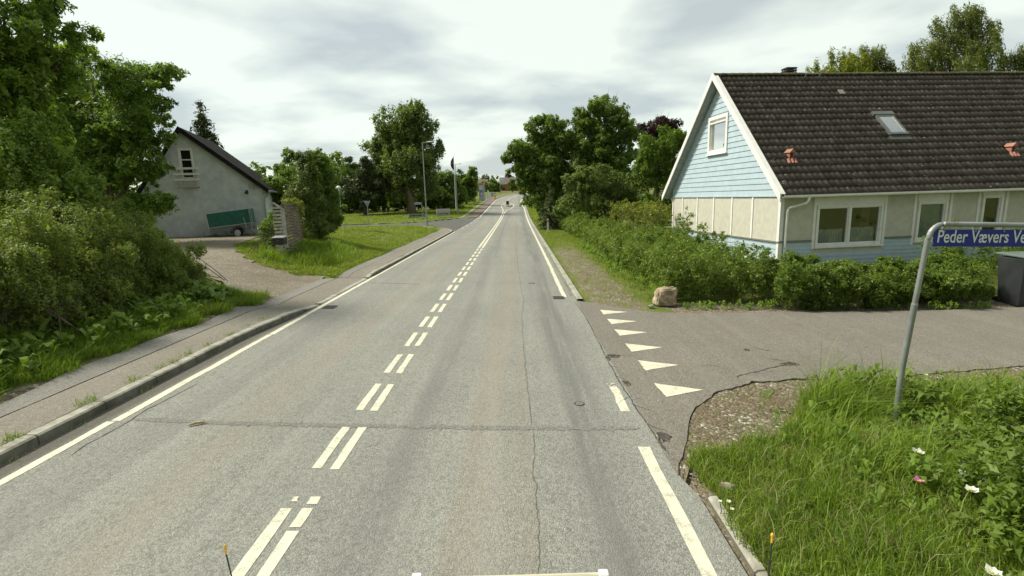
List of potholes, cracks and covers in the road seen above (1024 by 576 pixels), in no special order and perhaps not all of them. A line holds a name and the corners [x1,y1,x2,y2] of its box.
crack [516,229,540,574]
crack [69,384,196,457]
pothole [655,432,672,442]
